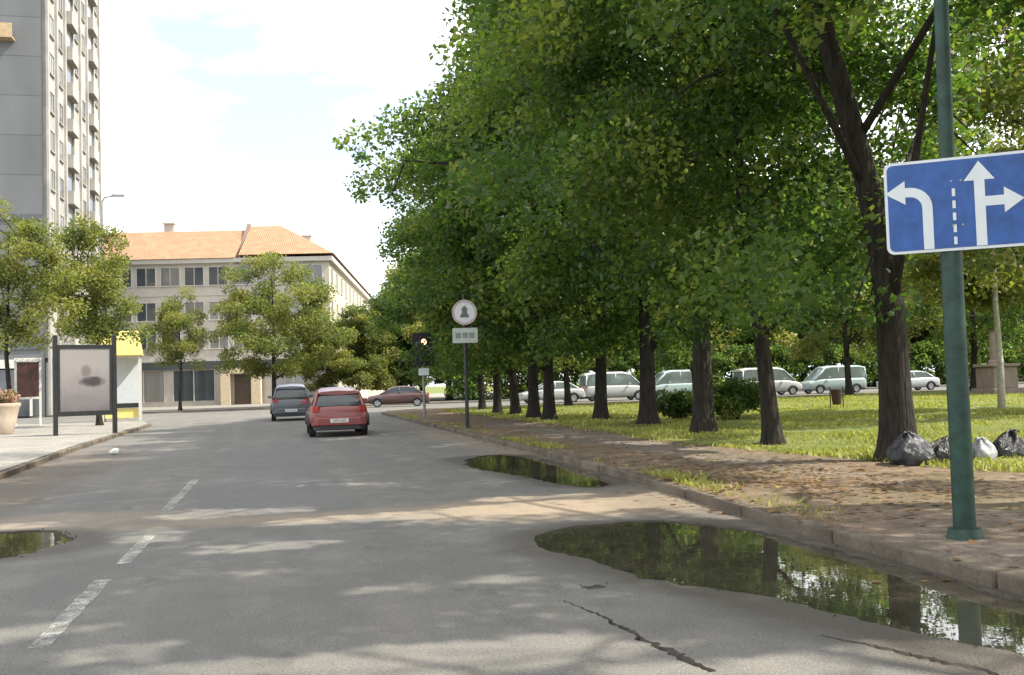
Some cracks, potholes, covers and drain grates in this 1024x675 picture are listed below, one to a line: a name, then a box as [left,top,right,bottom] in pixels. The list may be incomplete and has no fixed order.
pothole [0,528,77,559]
crack [563,600,716,672]
pothole [463,454,612,488]
pothole [534,520,1024,656]
crack [820,634,999,675]
